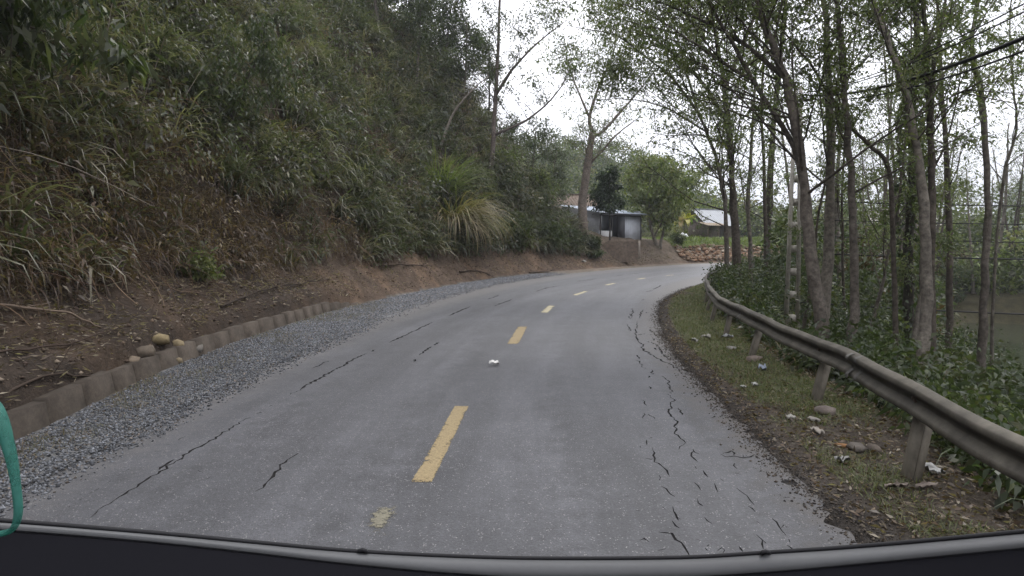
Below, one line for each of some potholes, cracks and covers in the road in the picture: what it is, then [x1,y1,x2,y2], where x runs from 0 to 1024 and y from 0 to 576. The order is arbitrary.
crack [392,323,438,362]
crack [627,299,793,555]
crack [293,350,374,393]
crack [67,405,272,518]
crack [256,453,298,491]
